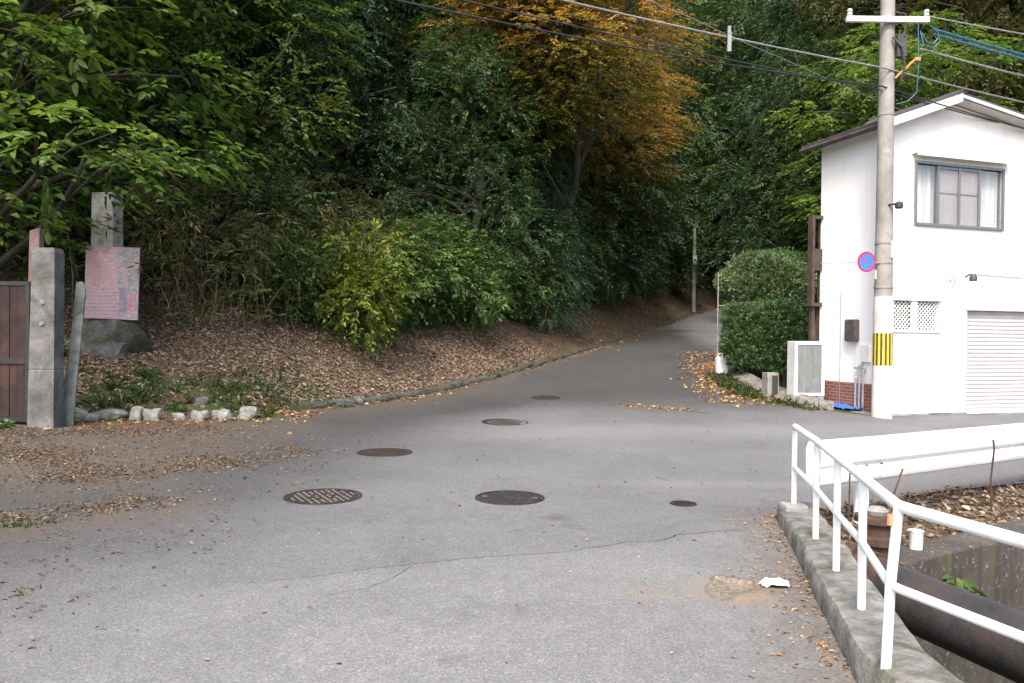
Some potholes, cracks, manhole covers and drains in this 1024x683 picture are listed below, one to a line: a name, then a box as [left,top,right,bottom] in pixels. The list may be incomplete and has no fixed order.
crack [252,530,733,596]
manhole cover [475,490,545,505]
manhole cover [357,448,413,457]
manhole cover [283,488,362,505]
